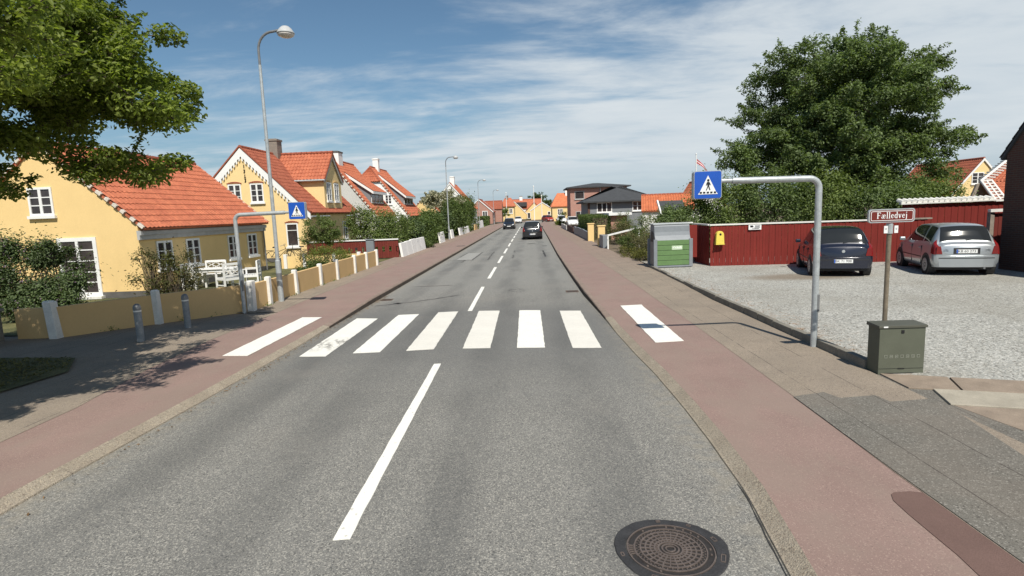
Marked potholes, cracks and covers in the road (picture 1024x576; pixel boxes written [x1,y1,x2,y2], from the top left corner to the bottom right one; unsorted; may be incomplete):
manhole cover [614,520,730,576]
